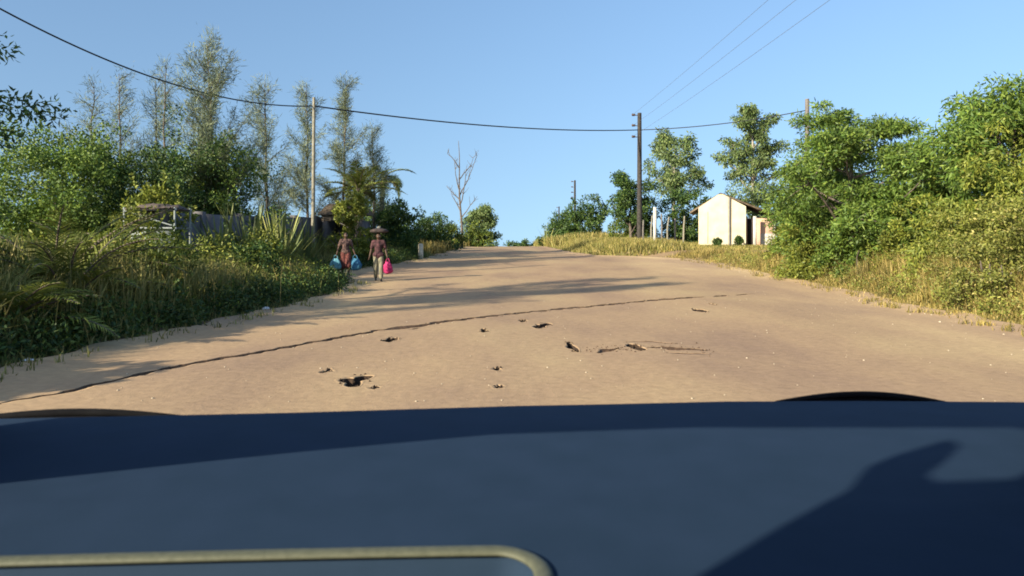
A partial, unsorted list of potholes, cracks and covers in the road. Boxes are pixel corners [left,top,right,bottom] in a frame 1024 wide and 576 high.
crack [0,294,750,404]
pothole [623,343,649,351]
pothole [563,341,580,353]
pothole [334,373,377,388]
